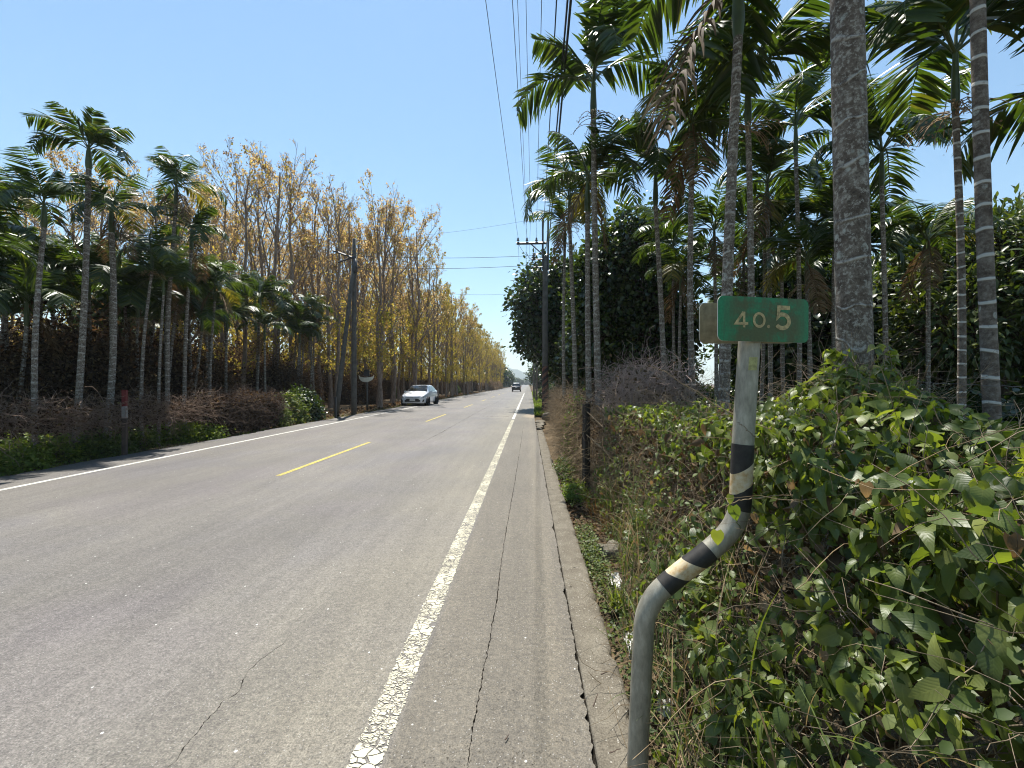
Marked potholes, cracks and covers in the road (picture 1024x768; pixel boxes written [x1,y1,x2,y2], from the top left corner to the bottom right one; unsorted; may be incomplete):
crack [468,444,521,761]
crack [168,633,292,767]
